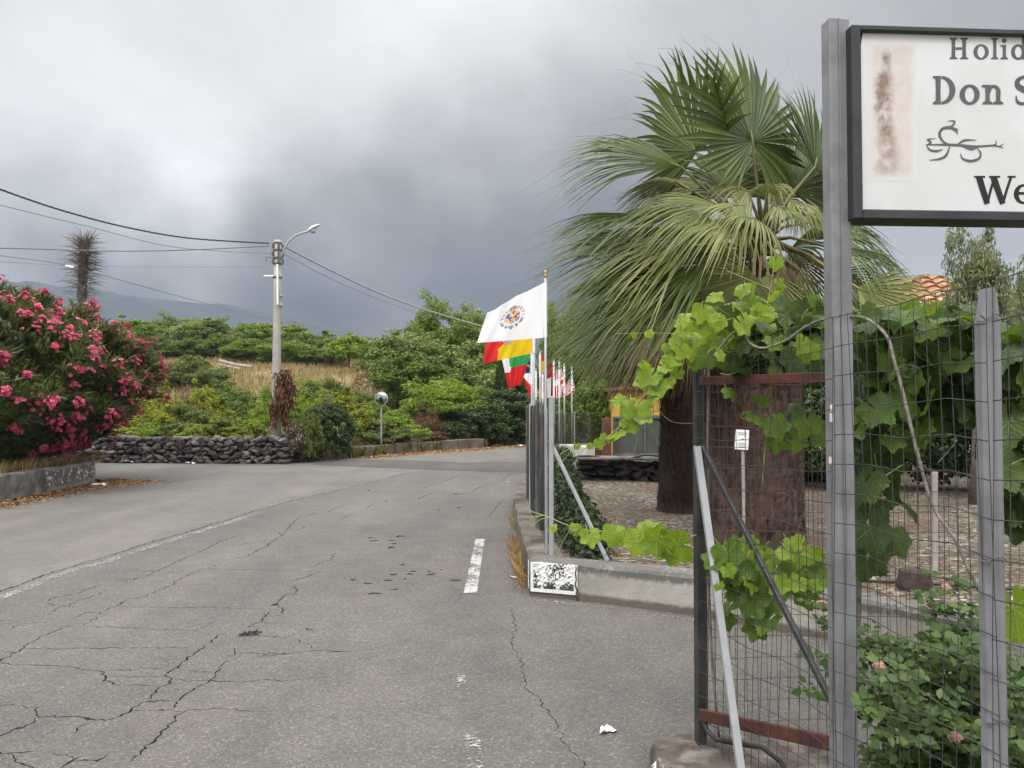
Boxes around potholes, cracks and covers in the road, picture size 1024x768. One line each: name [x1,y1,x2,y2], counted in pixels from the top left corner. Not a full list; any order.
crack [510,610,586,767]
crack [0,553,347,768]
